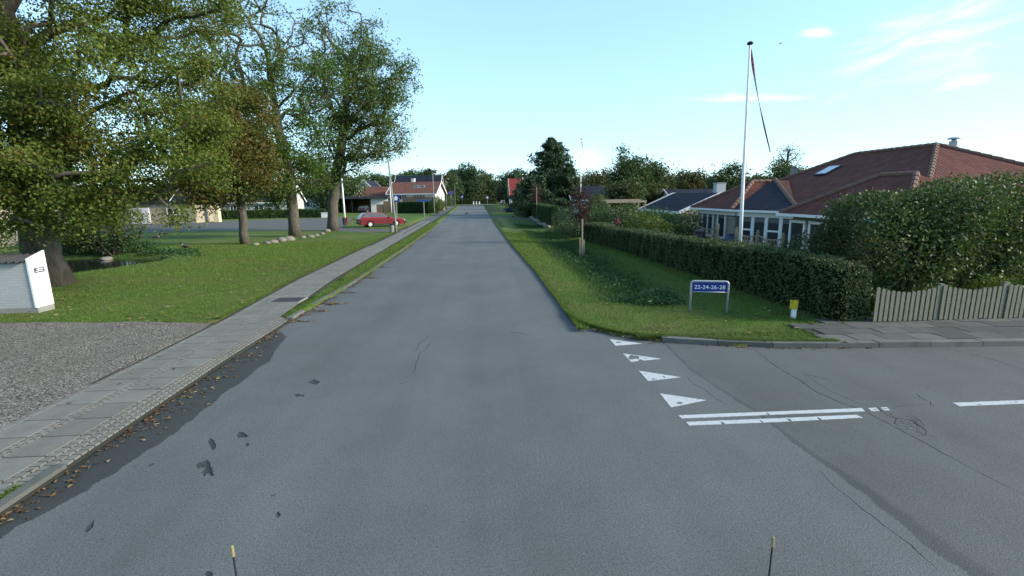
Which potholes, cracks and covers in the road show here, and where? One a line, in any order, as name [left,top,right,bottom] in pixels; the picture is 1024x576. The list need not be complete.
pothole [195,459,214,477]
crack [756,351,1024,495]
crack [820,471,935,567]
